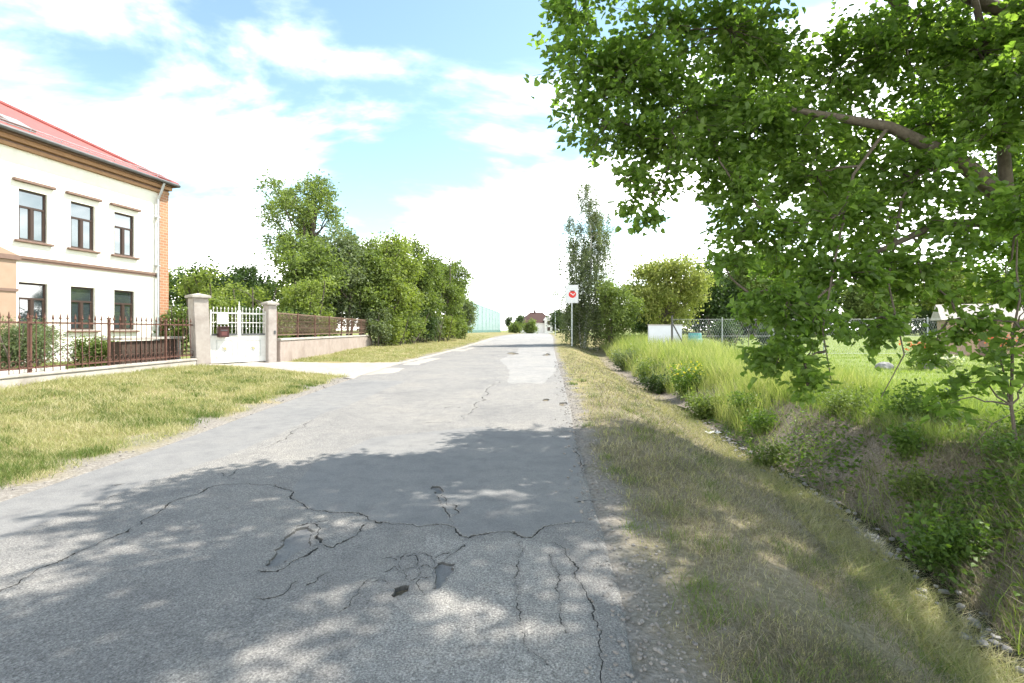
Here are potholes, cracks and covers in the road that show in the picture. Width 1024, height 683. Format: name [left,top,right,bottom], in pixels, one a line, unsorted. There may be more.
pothole [432,560,456,591]
crack [445,381,503,419]
pothole [389,583,412,599]
crack [0,446,615,683]
